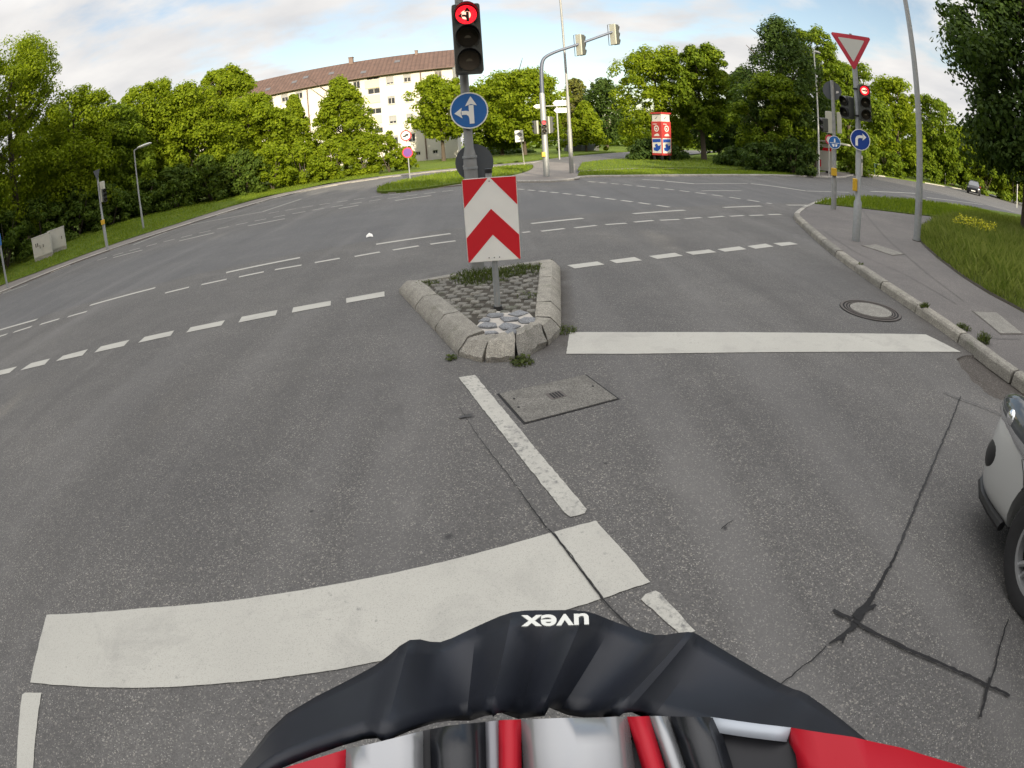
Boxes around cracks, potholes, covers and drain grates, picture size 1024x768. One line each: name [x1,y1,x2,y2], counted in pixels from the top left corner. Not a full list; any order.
utility cover [972,311,1024,335]
utility cover [861,244,905,256]
manhole cover [839,299,902,322]
